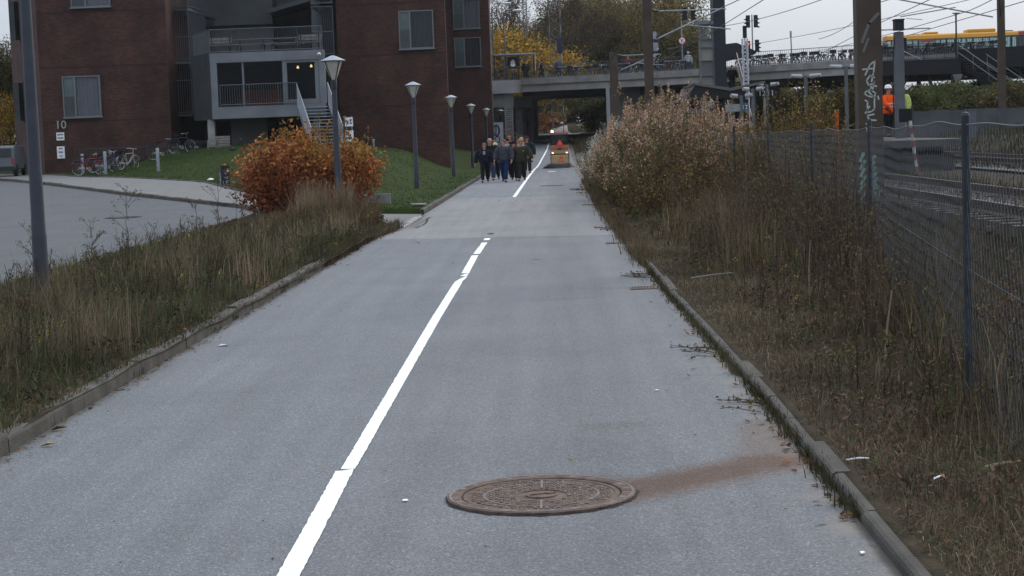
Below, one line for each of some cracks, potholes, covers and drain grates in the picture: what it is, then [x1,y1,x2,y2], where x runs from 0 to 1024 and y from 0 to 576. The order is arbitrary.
manhole cover [446,474,640,516]
